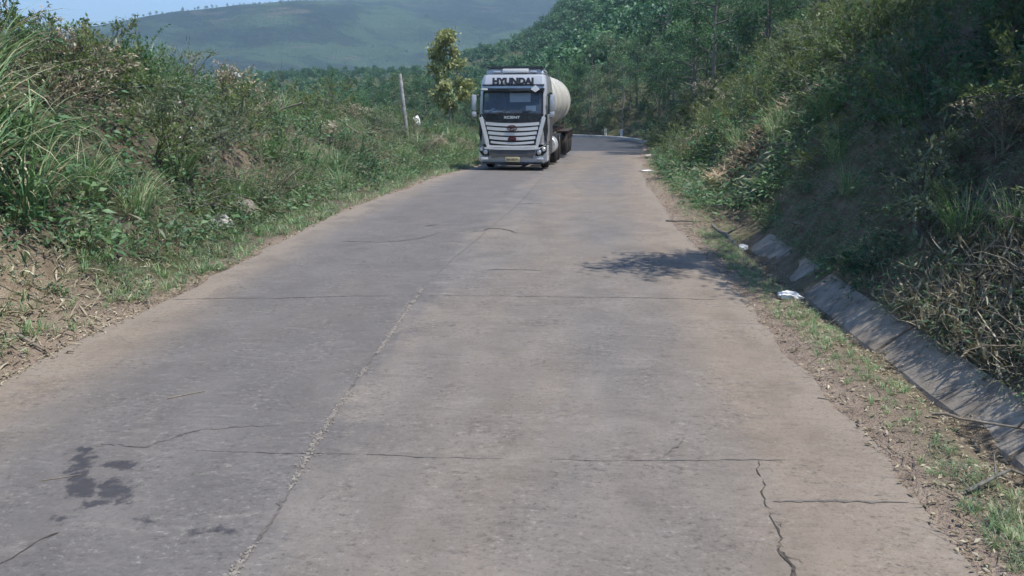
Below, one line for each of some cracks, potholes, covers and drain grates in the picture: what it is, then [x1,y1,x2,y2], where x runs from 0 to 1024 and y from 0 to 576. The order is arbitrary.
crack [0,532,59,563]
crack [101,286,895,576]
